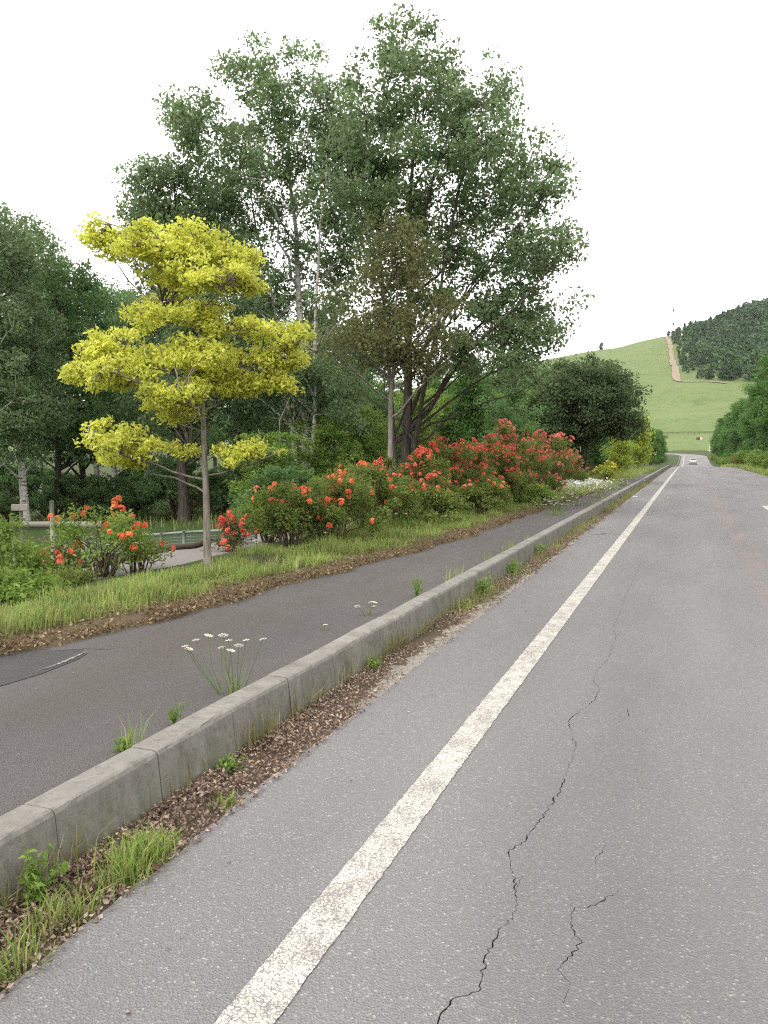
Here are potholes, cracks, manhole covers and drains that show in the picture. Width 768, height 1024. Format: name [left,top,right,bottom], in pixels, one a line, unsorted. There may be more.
crack [437,568,639,1024]
